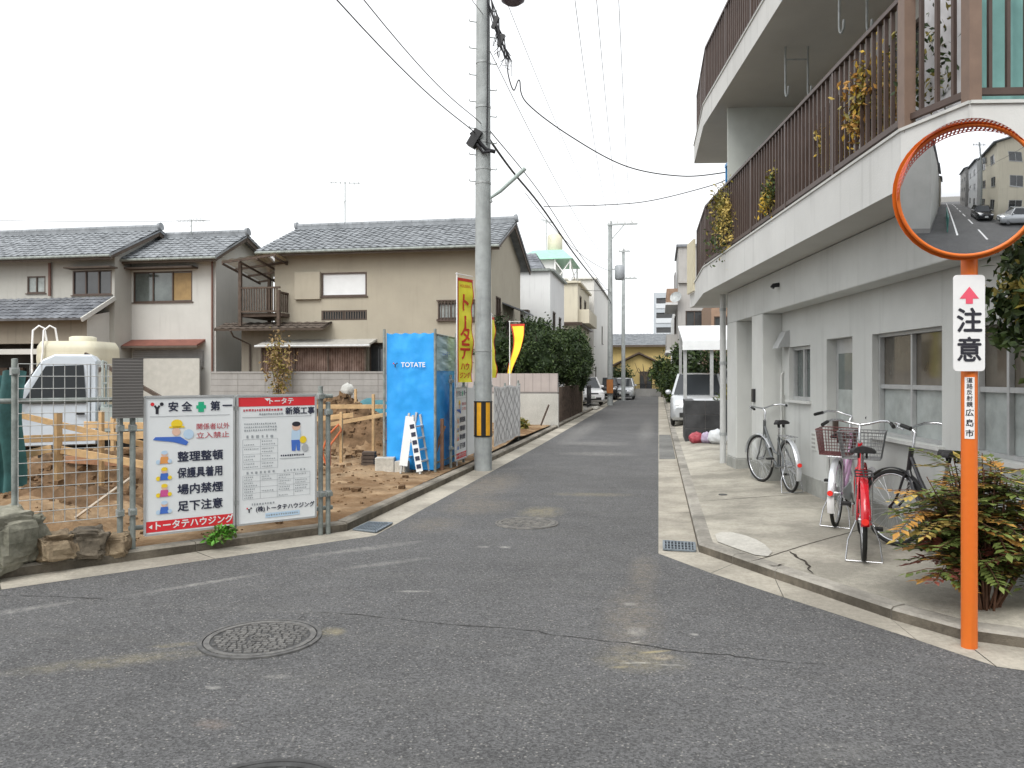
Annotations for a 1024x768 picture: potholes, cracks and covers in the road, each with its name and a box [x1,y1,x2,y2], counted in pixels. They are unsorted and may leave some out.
manhole cover [197,619,322,660]
manhole cover [228,758,336,768]
crack [298,612,814,664]
drain grate [663,540,696,552]
drain grate [353,521,393,533]
manhole cover [495,517,559,529]
